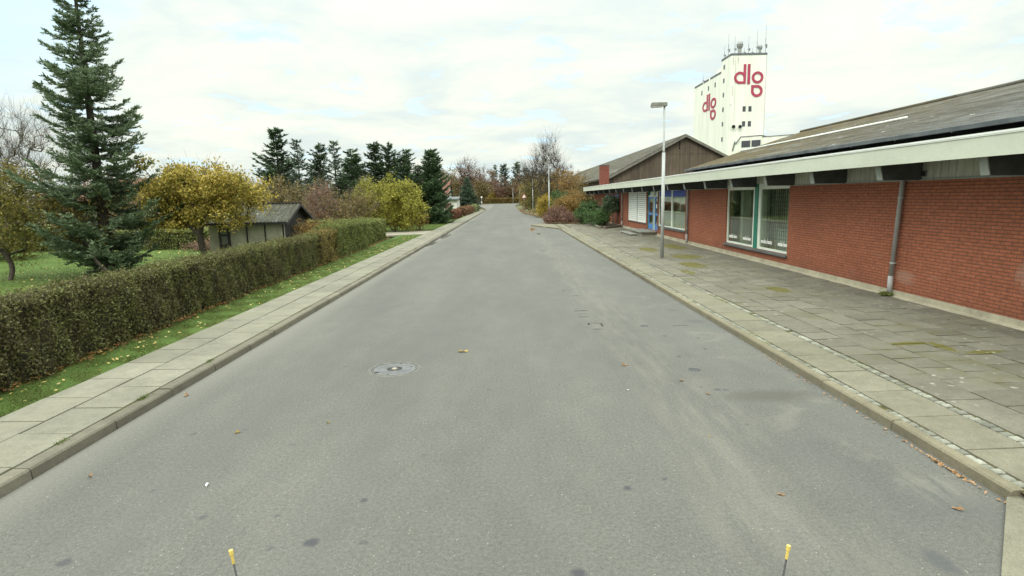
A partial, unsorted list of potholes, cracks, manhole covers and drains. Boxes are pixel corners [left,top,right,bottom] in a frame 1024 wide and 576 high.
manhole cover [367,362,421,377]
